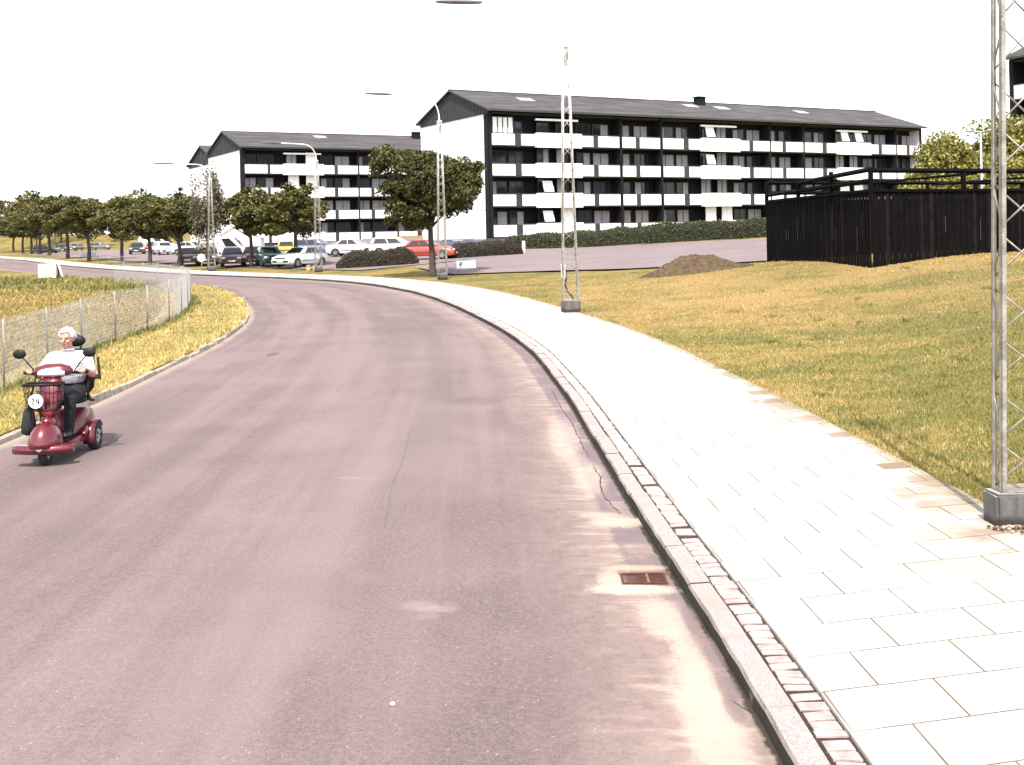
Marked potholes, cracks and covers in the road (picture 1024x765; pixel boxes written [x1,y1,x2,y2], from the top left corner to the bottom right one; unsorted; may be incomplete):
crack [554,394,619,512]
drain grate [618,572,671,585]
